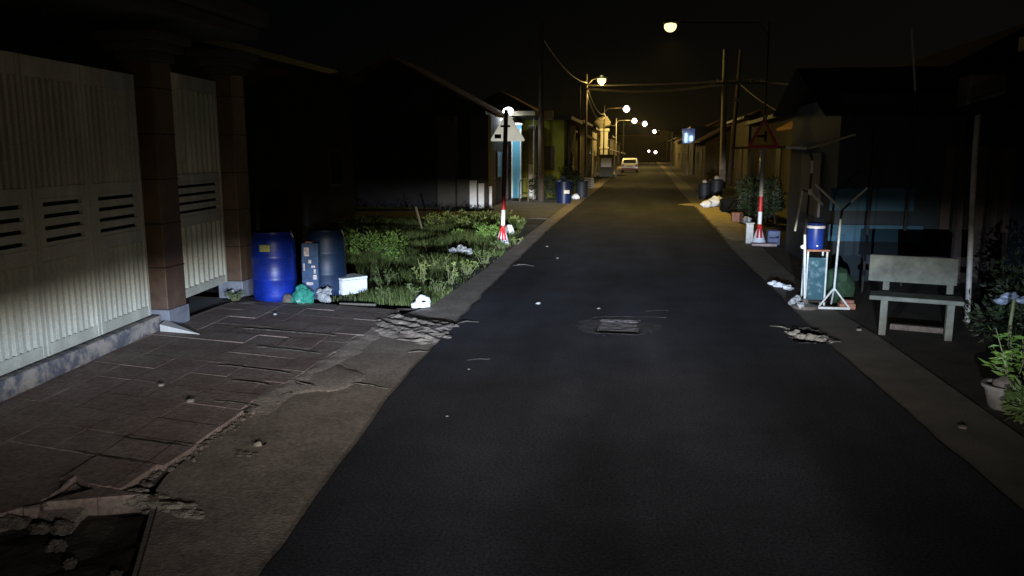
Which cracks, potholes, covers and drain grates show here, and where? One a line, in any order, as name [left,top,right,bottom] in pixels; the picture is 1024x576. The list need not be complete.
manhole cover [572,318,663,338]
pothole [0,484,205,576]
pothole [370,314,460,345]
pothole [784,327,835,344]
crack [75,436,190,463]
